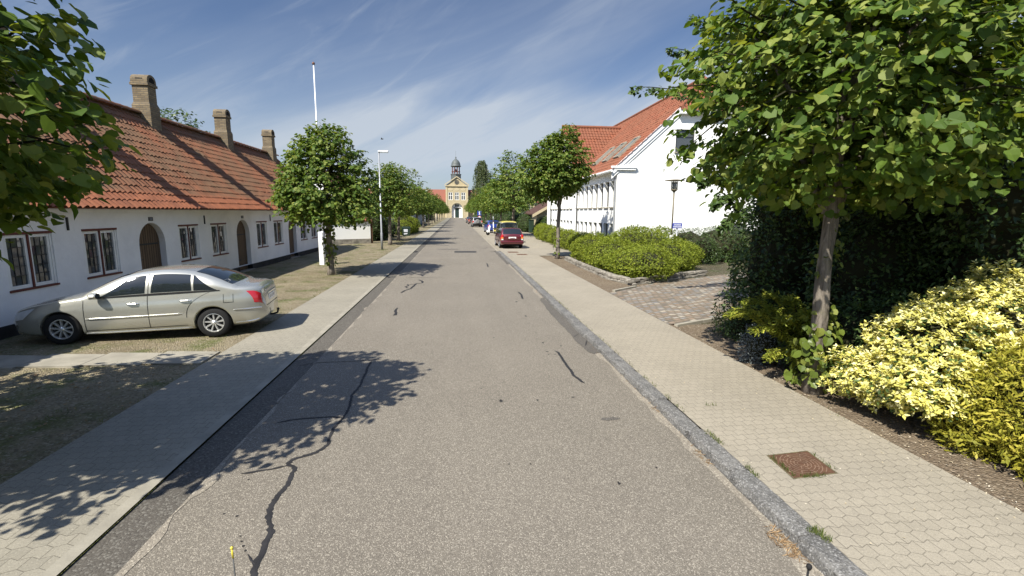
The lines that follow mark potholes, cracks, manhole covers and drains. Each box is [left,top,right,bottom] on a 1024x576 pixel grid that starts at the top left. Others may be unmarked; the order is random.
manhole cover [766,451,838,479]
